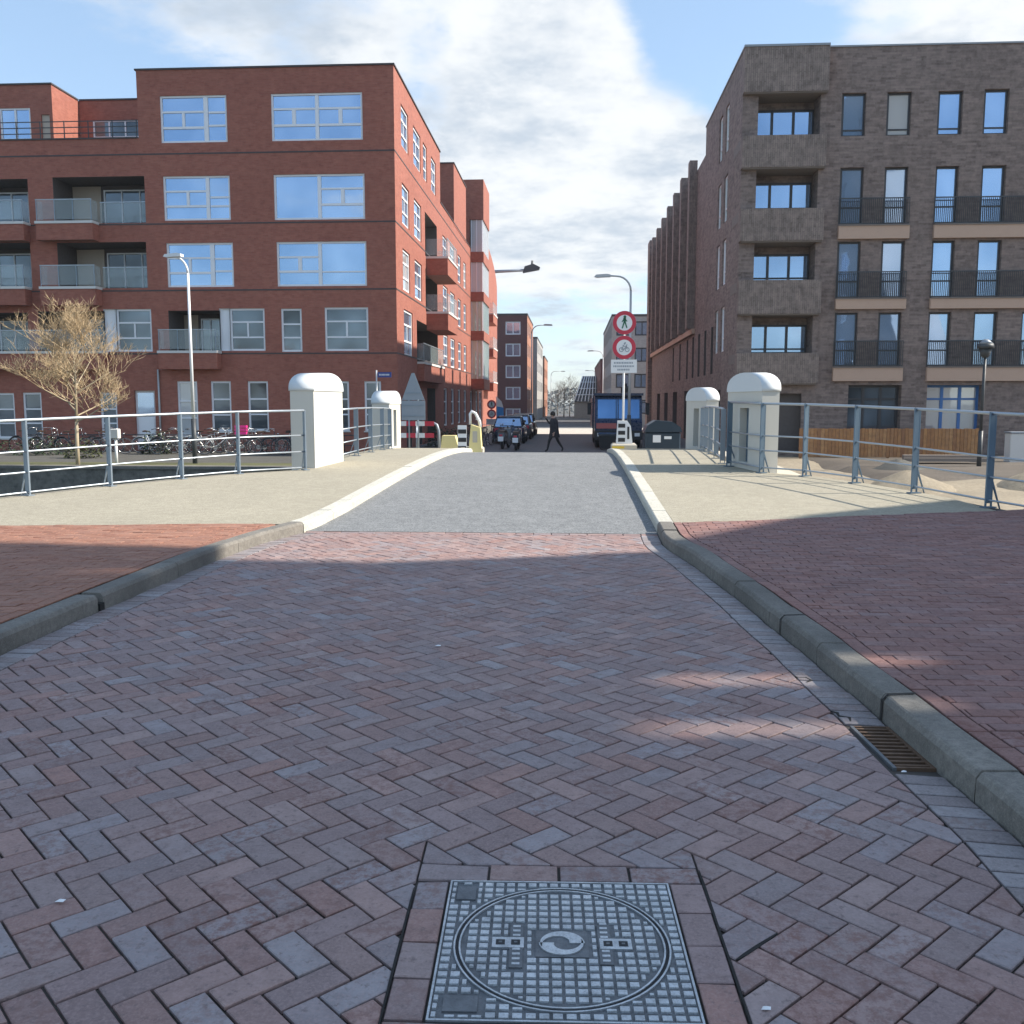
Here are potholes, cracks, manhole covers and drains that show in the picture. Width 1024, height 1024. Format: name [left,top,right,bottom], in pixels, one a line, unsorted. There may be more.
drain grate [850,726,936,772]
manhole cover [425,880,706,1024]
